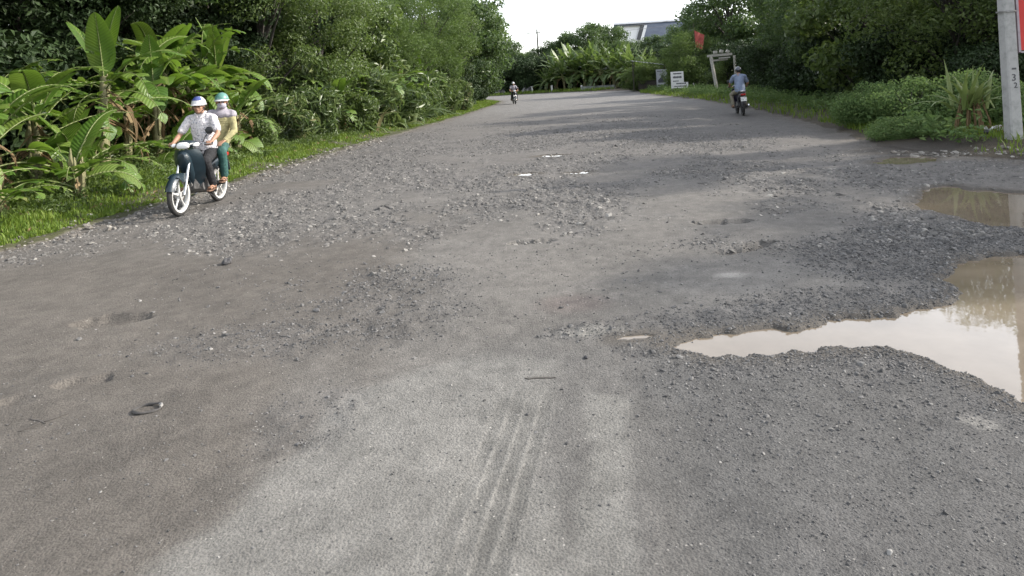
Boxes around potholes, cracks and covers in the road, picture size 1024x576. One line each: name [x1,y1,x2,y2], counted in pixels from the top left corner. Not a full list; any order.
pothole [68,312,155,330]
pothole [910,184,1024,228]
pothole [660,251,1024,403]
